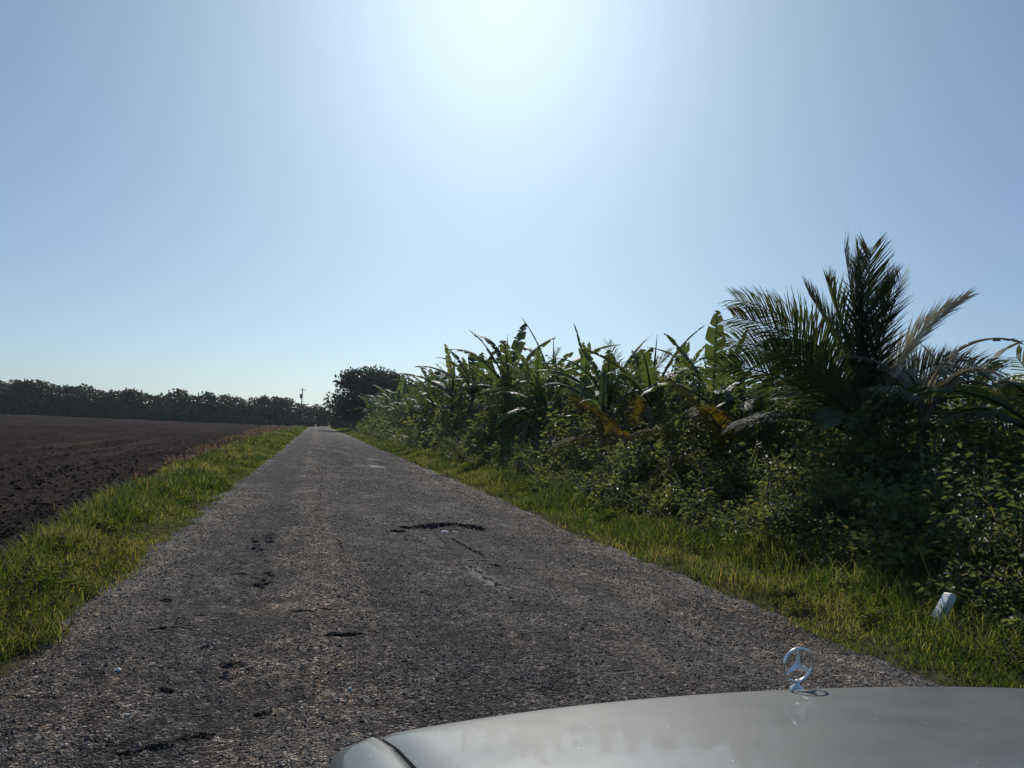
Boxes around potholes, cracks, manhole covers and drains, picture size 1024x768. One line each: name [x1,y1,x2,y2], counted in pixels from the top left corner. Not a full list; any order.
pothole [181,647,280,694]
pothole [224,529,292,562]
pothole [390,520,518,537]
crack [438,536,541,593]
pothole [143,726,243,753]
pothole [115,733,211,762]
pothole [227,563,292,600]
